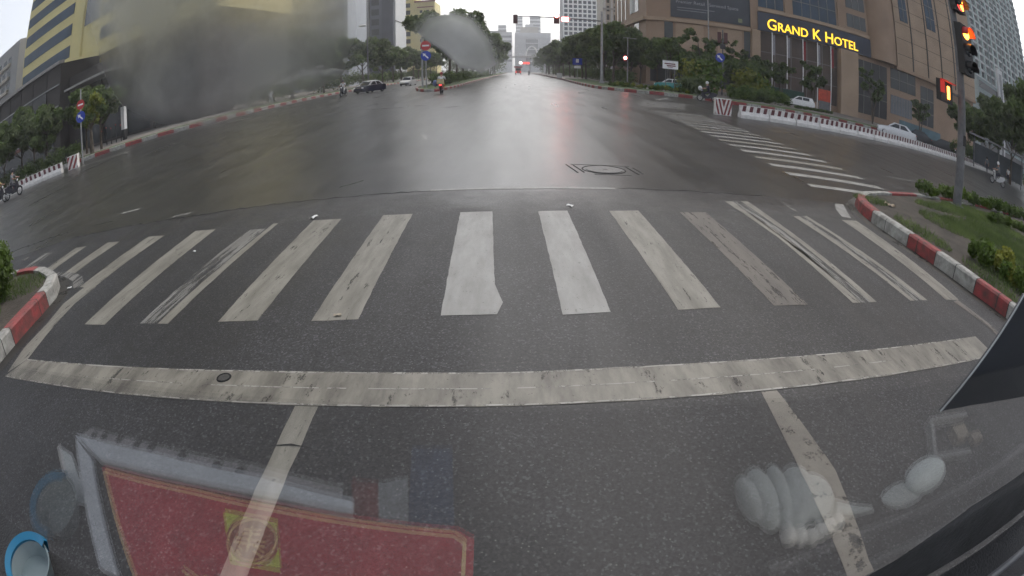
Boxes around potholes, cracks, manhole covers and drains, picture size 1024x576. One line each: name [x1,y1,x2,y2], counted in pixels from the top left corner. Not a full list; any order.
manhole cover [565,164,643,176]
utility cover [216,373,231,382]
